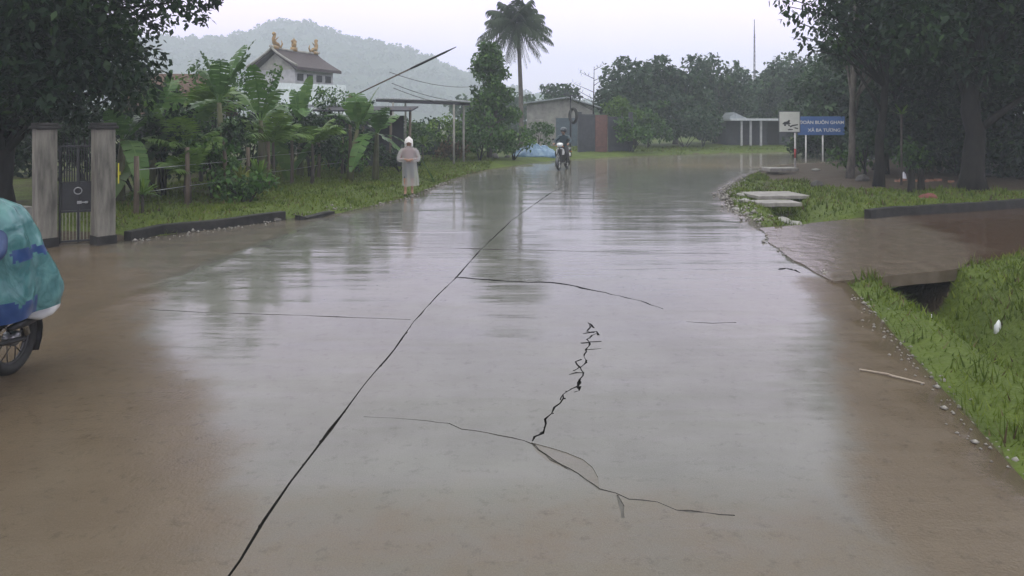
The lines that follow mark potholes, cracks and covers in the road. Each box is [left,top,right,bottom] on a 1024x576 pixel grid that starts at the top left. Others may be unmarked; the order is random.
crack [377,323,735,518]
crack [455,277,663,309]
